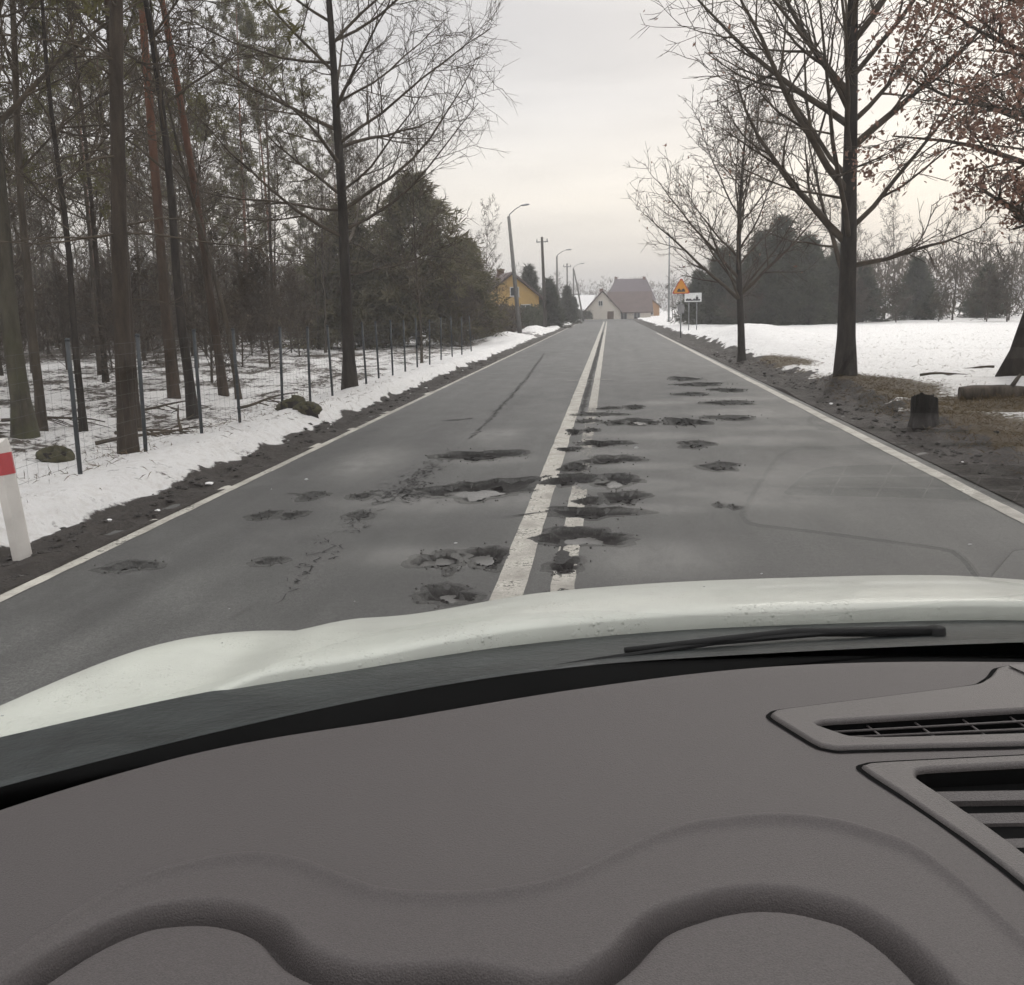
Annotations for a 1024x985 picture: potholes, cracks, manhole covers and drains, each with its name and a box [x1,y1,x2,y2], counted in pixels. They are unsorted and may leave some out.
crack [444,354,544,438]
pothole [597,490,656,506]
pothole [409,581,487,607]
crack [277,450,458,602]
pothole [575,440,639,448]
pothole [540,555,588,576]
pothole [401,549,474,570]
pothole [273,510,313,520]
pothole [556,461,591,473]
pothole [566,496,603,506]
pothole [344,492,381,501]
pothole [527,526,641,548]
